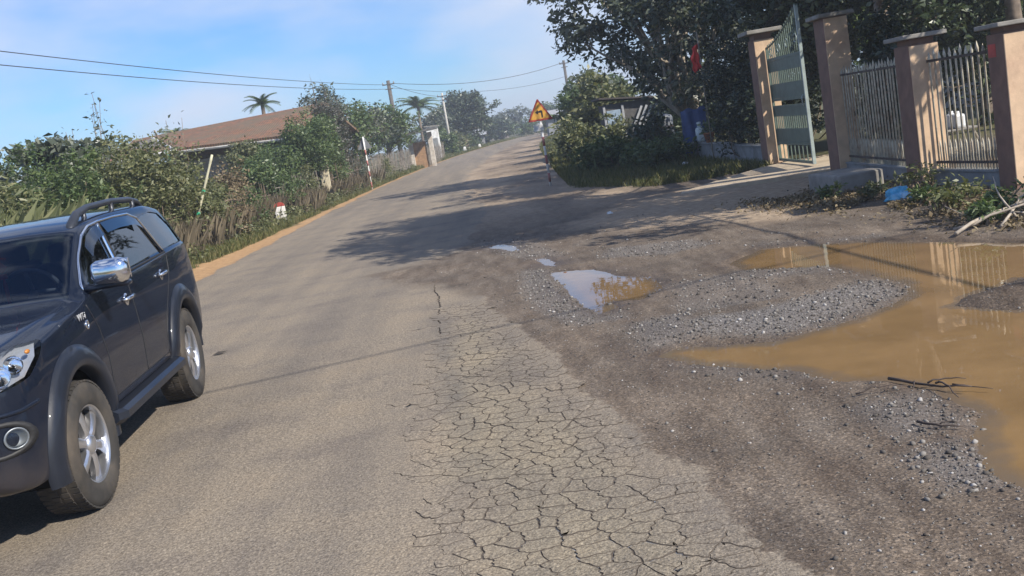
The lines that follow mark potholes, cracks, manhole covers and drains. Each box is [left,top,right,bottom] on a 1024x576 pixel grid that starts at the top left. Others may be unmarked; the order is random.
crack [419,286,442,335]
pothole [539,266,679,316]
crack [403,303,801,576]
pothole [479,242,527,252]
pothole [528,254,568,267]
pothole [637,236,1024,501]
